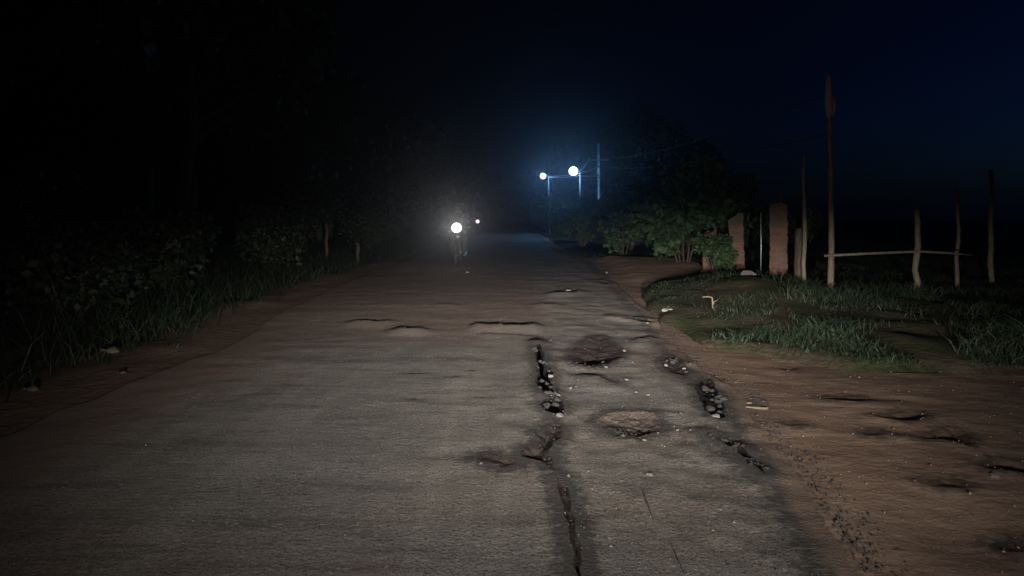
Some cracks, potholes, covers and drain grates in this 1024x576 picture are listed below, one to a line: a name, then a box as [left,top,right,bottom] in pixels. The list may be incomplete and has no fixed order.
pothole [594,410,662,437]
pothole [520,423,562,471]
pothole [661,355,690,378]
pothole [694,378,728,419]
pothole [477,453,520,468]
crack [557,477,583,576]
pothole [567,335,624,367]
crack [707,432,766,474]
